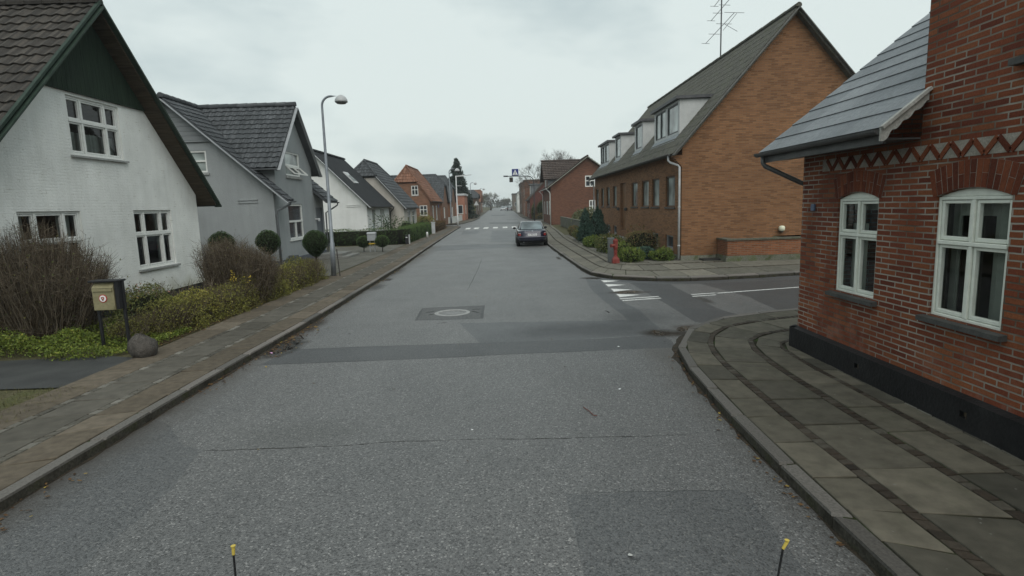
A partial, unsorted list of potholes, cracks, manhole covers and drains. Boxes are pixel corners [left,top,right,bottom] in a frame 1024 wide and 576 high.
crack [204,435,661,451]
pothole [271,340,301,354]
